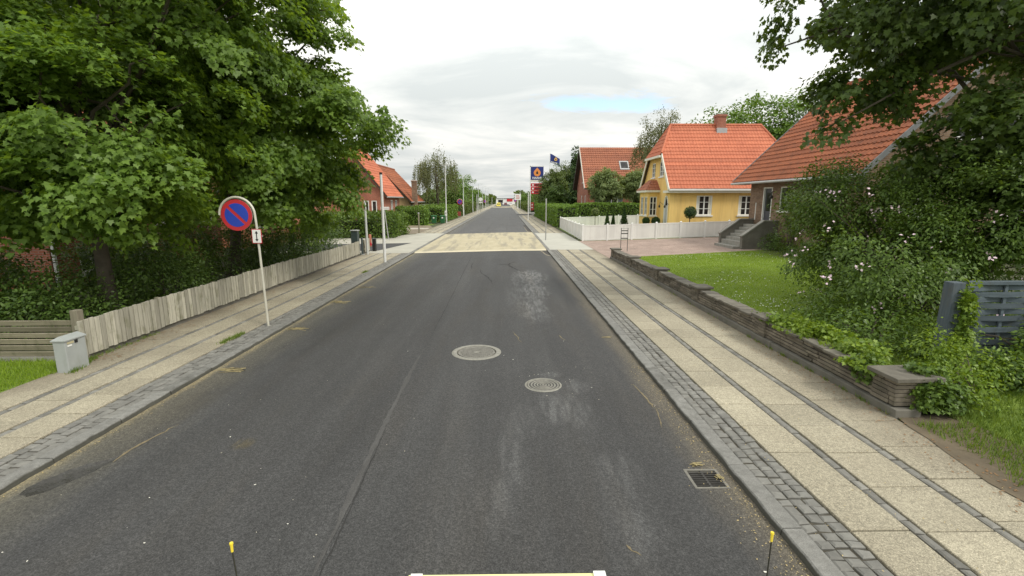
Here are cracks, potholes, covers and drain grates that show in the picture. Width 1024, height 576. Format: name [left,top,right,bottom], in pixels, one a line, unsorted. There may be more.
drain grate [683,469,731,489]
crack [113,425,177,462]
manhole cover [452,345,501,360]
manhole cover [525,378,562,392]
